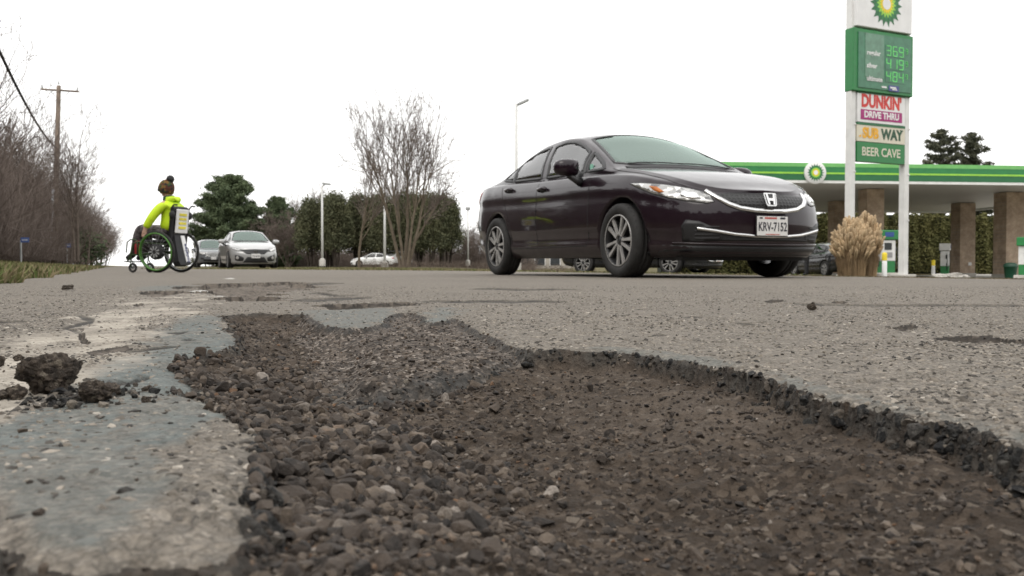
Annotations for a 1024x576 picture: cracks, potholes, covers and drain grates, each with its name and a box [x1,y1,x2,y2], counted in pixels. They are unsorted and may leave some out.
pothole [0,313,1024,576]
pothole [134,290,186,298]
crack [48,314,95,344]
pothole [183,282,334,302]
pothole [311,302,426,310]
